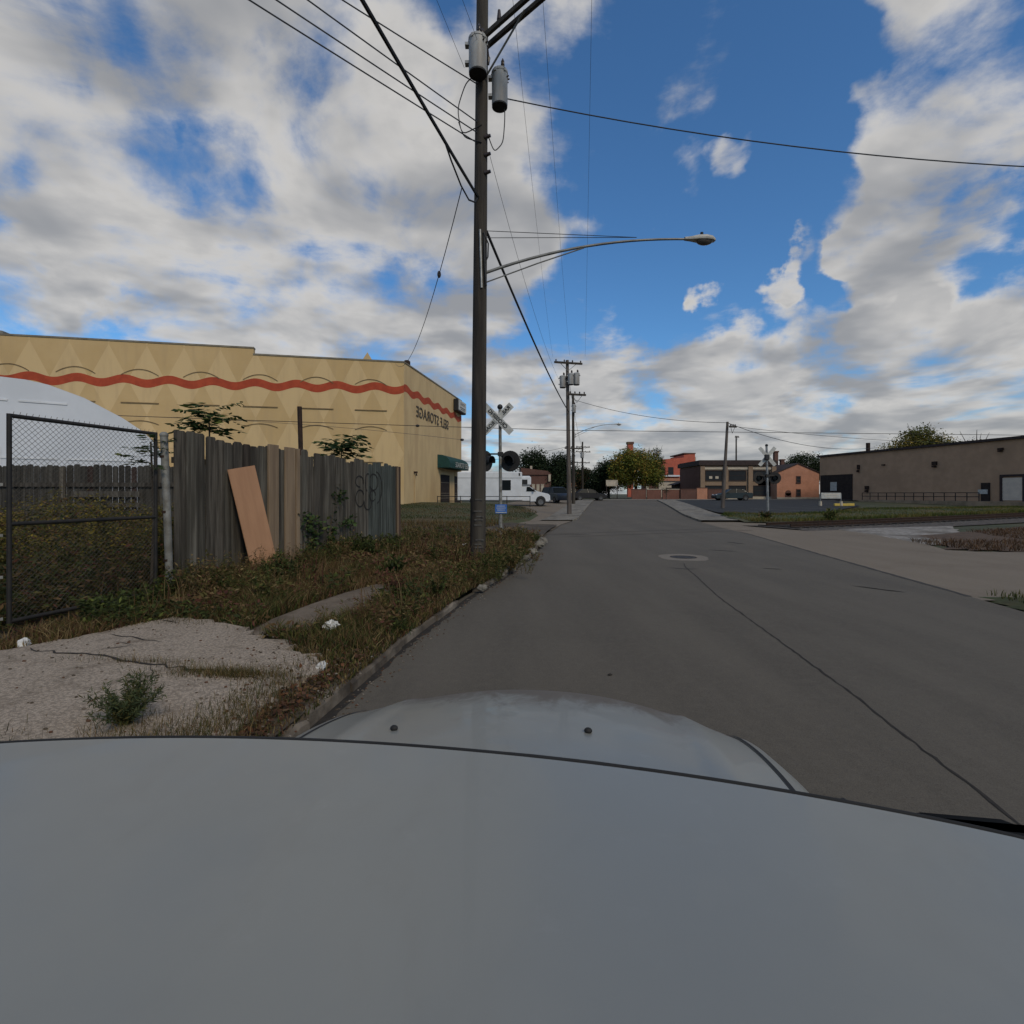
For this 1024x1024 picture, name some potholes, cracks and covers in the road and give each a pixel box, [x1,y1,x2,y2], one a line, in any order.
crack [30,619,259,679]
